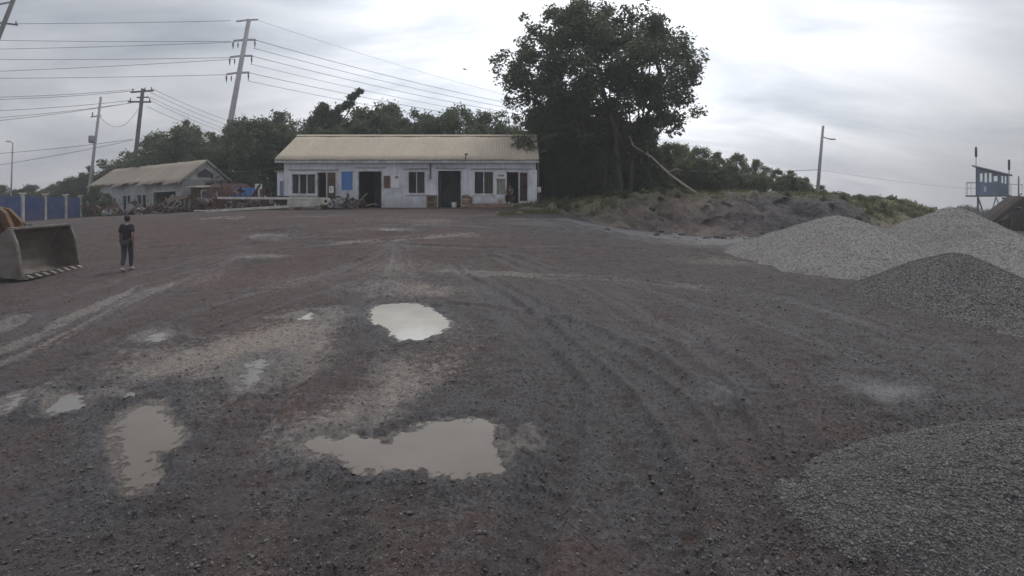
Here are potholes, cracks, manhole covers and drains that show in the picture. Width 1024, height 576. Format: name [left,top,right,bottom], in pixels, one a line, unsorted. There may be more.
pothole [36,387,101,417]
pothole [364,301,457,342]
pothole [225,350,284,394]
pothole [97,396,198,499]
pothole [136,327,176,343]
pothole [0,385,43,416]
pothole [293,309,321,320]
pothole [294,413,521,482]
